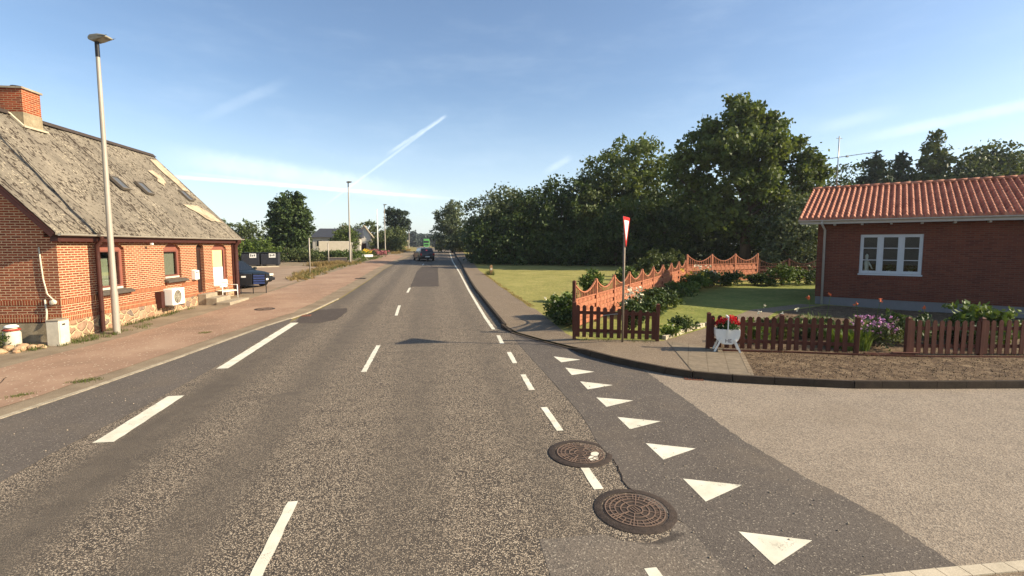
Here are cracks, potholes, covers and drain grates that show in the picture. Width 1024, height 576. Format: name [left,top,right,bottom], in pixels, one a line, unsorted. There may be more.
manhole cover [548,440,612,468]
manhole cover [593,489,678,535]
